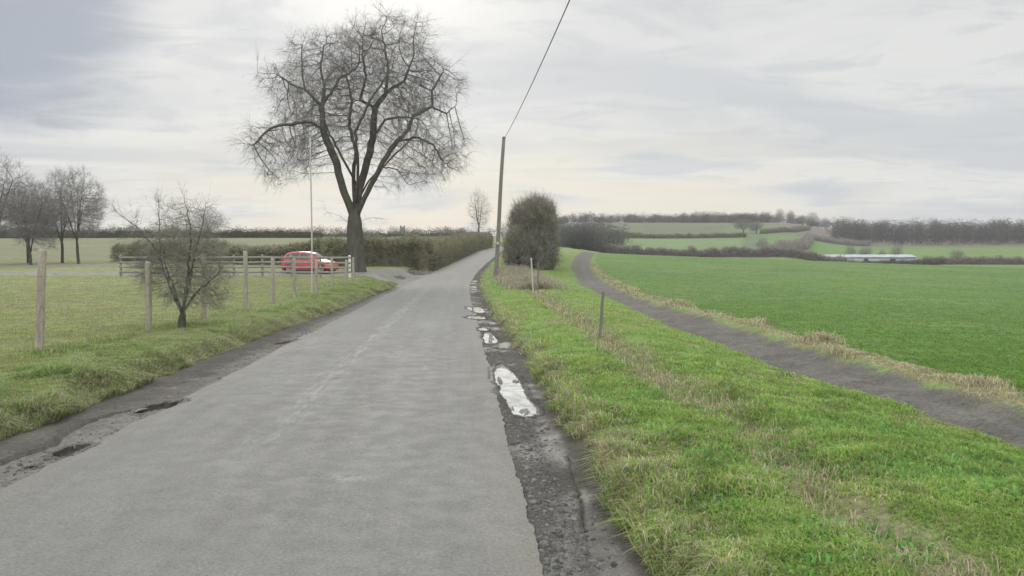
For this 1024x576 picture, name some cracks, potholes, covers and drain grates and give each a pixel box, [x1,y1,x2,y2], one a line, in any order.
pothole [40,442,100,461]
pothole [127,398,192,416]
pothole [488,363,545,419]
pothole [479,331,503,345]
